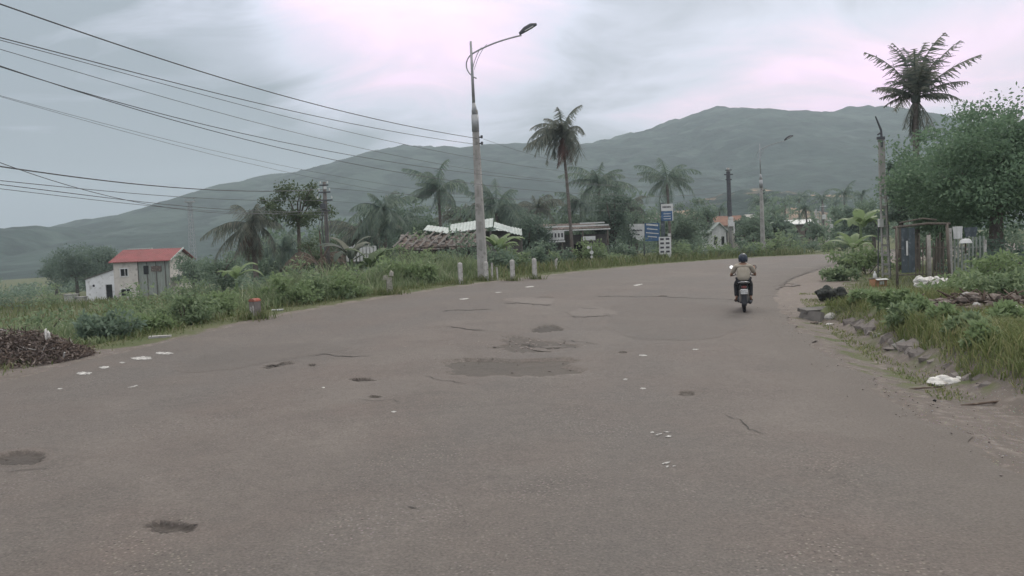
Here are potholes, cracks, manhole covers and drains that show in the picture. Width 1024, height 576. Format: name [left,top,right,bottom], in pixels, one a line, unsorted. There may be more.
pothole [485,335,587,354]
pothole [129,517,212,539]
pothole [0,447,58,468]
pothole [526,324,568,334]
pothole [256,360,302,370]
pothole [672,389,703,398]
